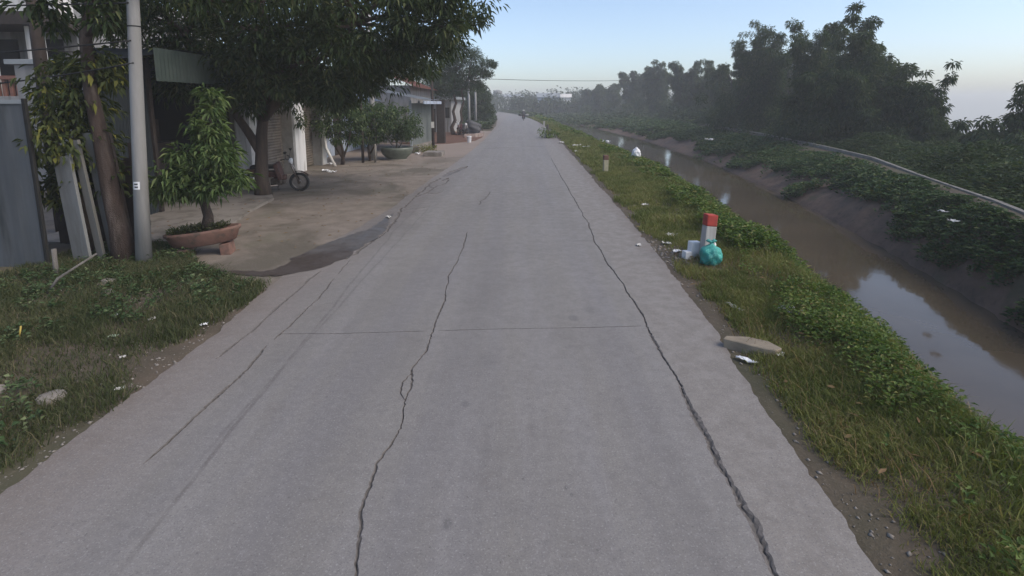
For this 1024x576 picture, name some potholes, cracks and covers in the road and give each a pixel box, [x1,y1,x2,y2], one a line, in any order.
crack [551,158,779,576]
crack [143,178,467,576]
